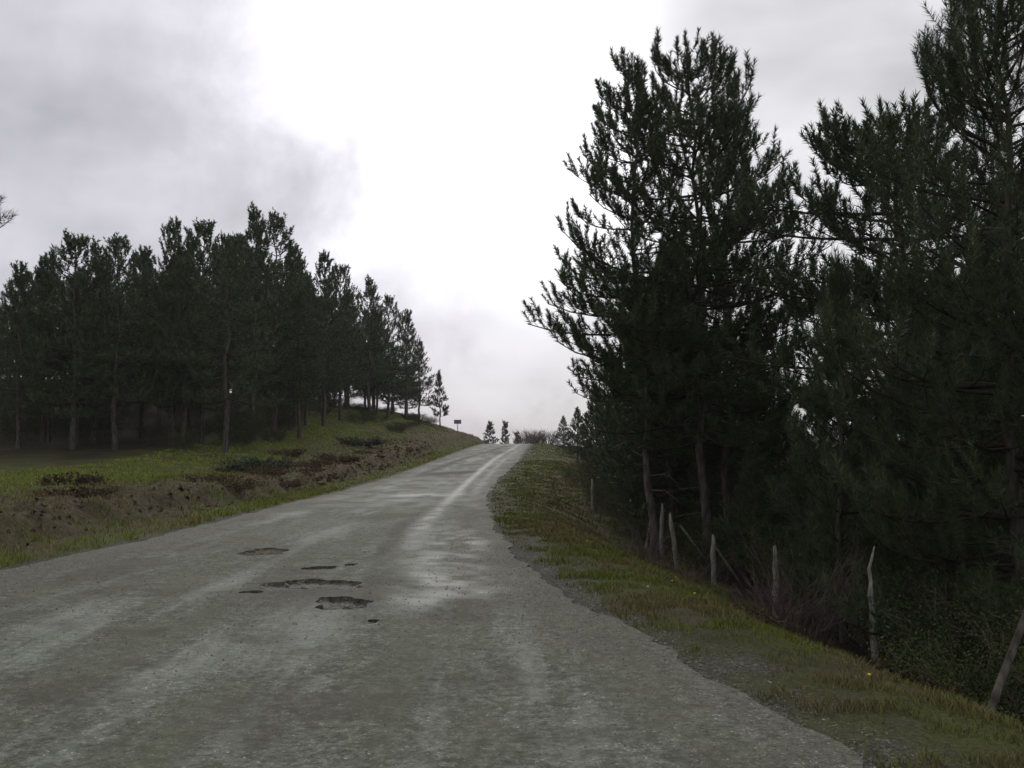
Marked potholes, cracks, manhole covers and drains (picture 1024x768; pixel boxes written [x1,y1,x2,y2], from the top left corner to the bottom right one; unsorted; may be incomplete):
pothole [315,596,374,610]
pothole [257,578,363,590]
pothole [237,548,289,556]
